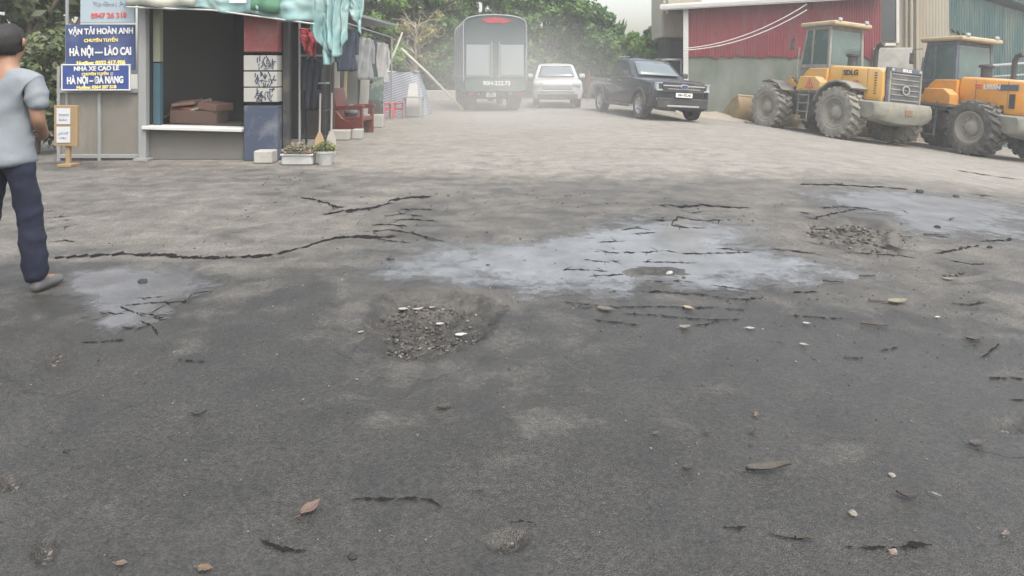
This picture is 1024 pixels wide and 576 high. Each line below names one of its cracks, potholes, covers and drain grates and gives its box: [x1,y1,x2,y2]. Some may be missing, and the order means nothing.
crack [44,195,442,259]
pothole [334,281,533,381]
crack [777,206,871,255]
pothole [770,212,924,262]
crack [980,344,1024,380]
crack [802,180,904,189]
crack [935,235,1018,265]
crack [845,541,933,550]
crack [81,290,212,343]
crack [560,203,761,327]
crack [354,496,440,506]
crack [258,537,306,552]
